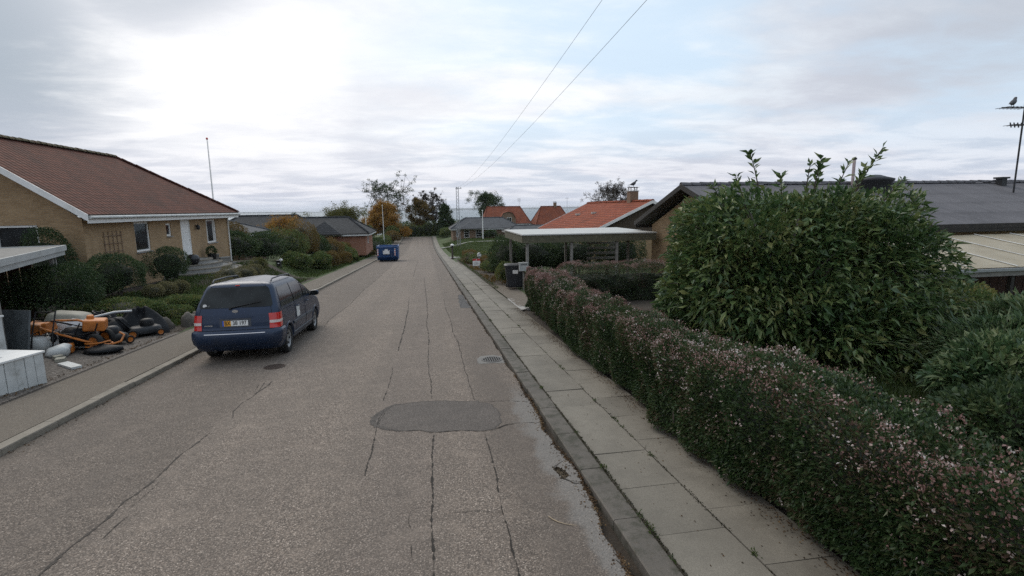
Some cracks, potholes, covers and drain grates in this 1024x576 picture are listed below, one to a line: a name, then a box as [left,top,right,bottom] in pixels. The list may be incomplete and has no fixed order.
crack [364,368,535,576]
drain grate [477,355,504,364]
crack [38,434,208,576]
